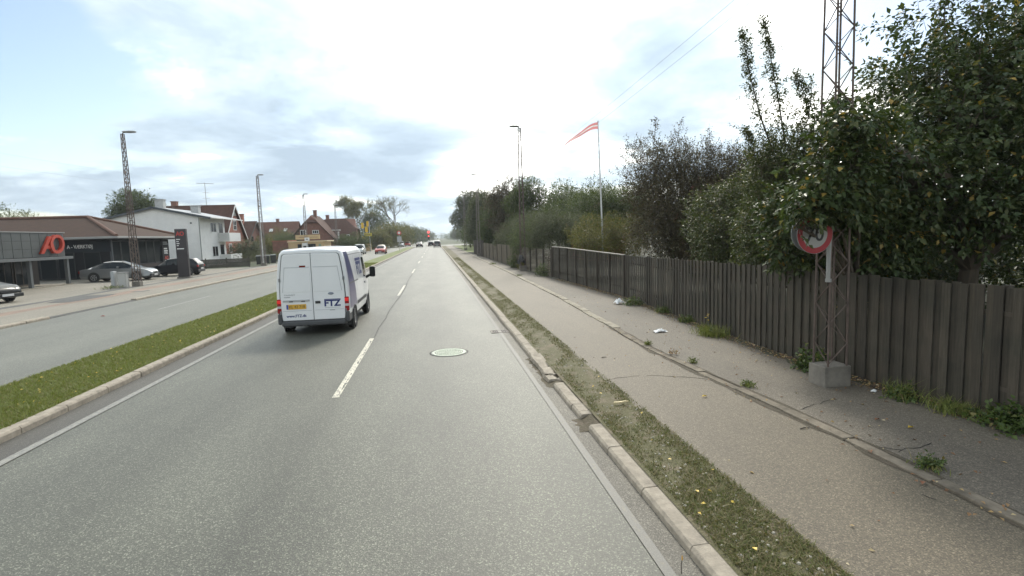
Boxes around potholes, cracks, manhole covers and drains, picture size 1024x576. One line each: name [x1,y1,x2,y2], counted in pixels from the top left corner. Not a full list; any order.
manhole cover [430,348,468,357]
